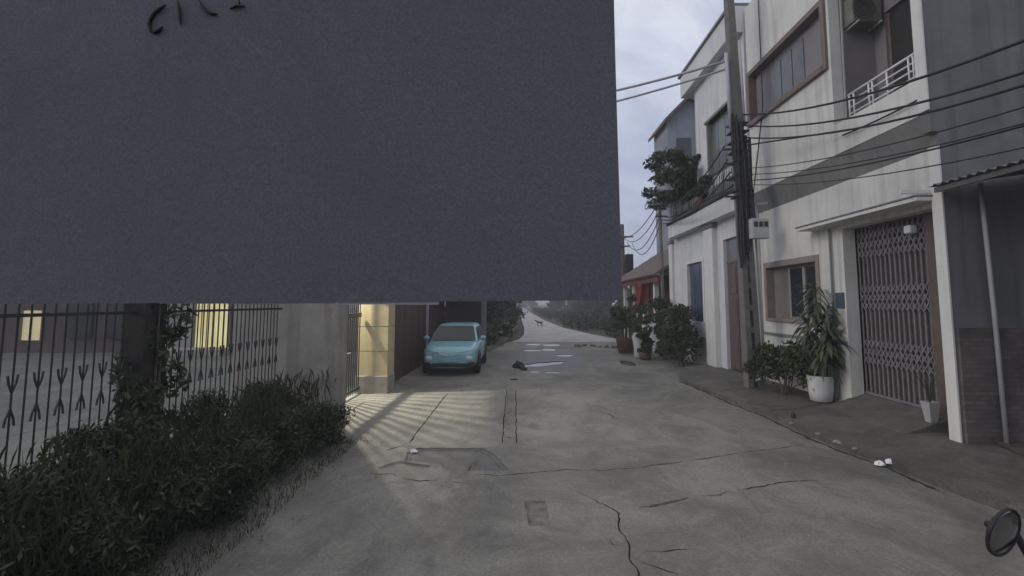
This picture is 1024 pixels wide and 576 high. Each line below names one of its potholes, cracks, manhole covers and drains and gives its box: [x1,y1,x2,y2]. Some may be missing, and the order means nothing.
crack [571,480,815,576]
crack [363,381,944,493]
